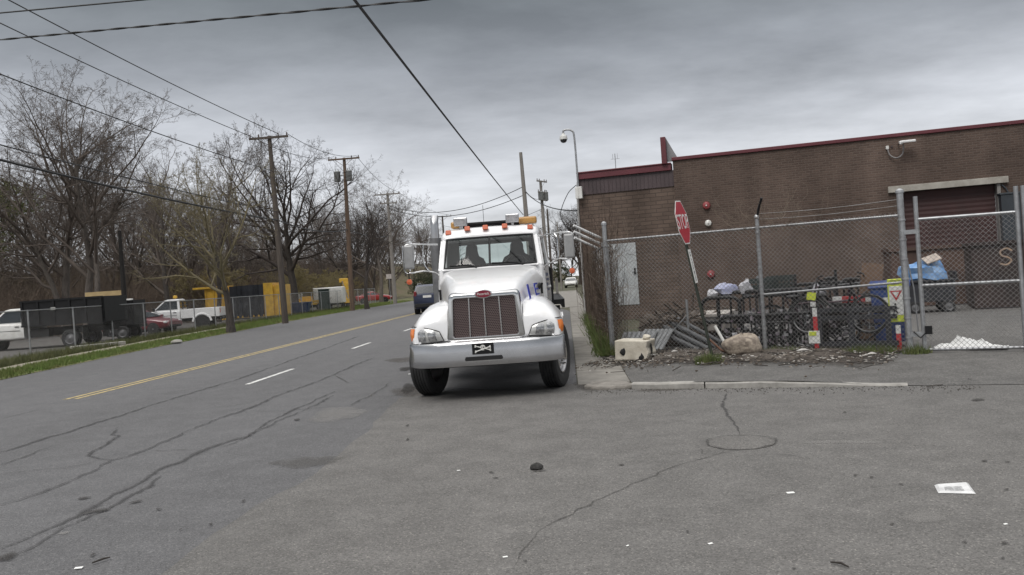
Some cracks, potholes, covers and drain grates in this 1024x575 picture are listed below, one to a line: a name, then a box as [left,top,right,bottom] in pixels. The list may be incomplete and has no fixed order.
crack [3,359,387,553]
crack [518,396,800,559]
manhole cover [707,436,775,449]
